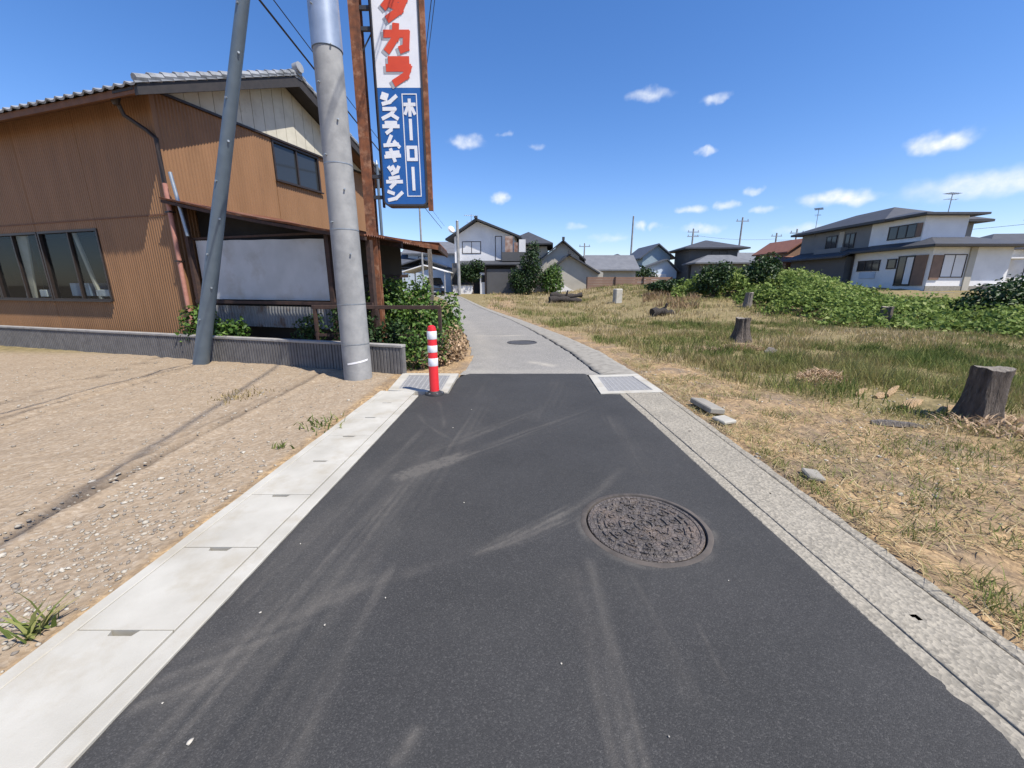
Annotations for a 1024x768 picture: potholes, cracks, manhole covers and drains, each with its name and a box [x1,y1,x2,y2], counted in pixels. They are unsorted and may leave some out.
manhole cover [581,493,714,568]
drain grate [589,374,663,394]
drain grate [388,373,459,396]
